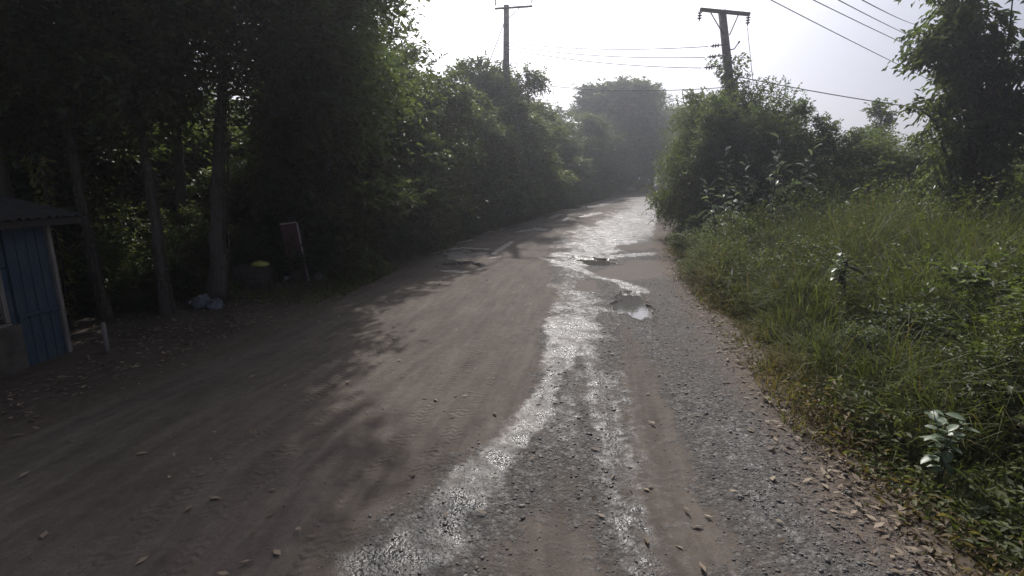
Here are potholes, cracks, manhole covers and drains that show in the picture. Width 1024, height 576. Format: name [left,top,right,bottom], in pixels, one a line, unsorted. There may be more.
pothole [435,261,486,272]
pothole [566,254,625,267]
pothole [607,290,660,322]
